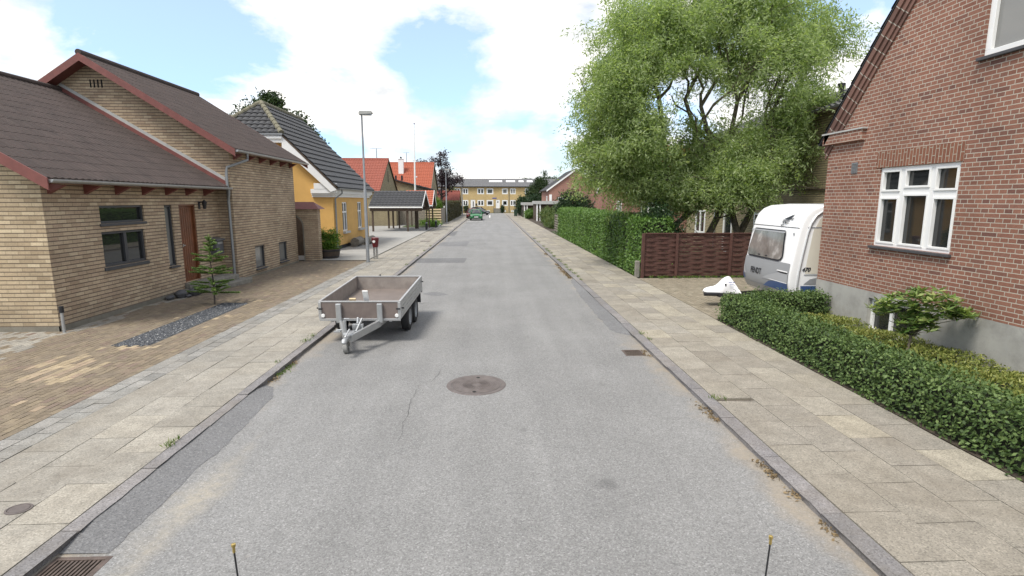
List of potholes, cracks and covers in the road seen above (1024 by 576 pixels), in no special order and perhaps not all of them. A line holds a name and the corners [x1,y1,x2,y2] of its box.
utility cover [4,503,34,515]
manhole cover [447,375,506,396]
drain grate [35,556,113,576]
